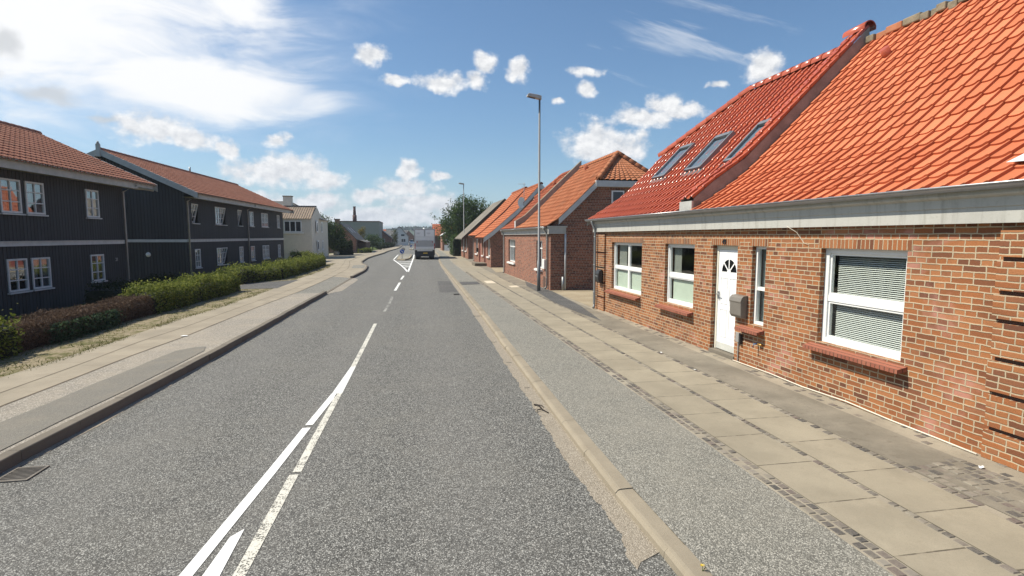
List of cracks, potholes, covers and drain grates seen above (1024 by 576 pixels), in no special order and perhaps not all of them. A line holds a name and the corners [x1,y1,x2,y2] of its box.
drain grate [0,465,50,483]
